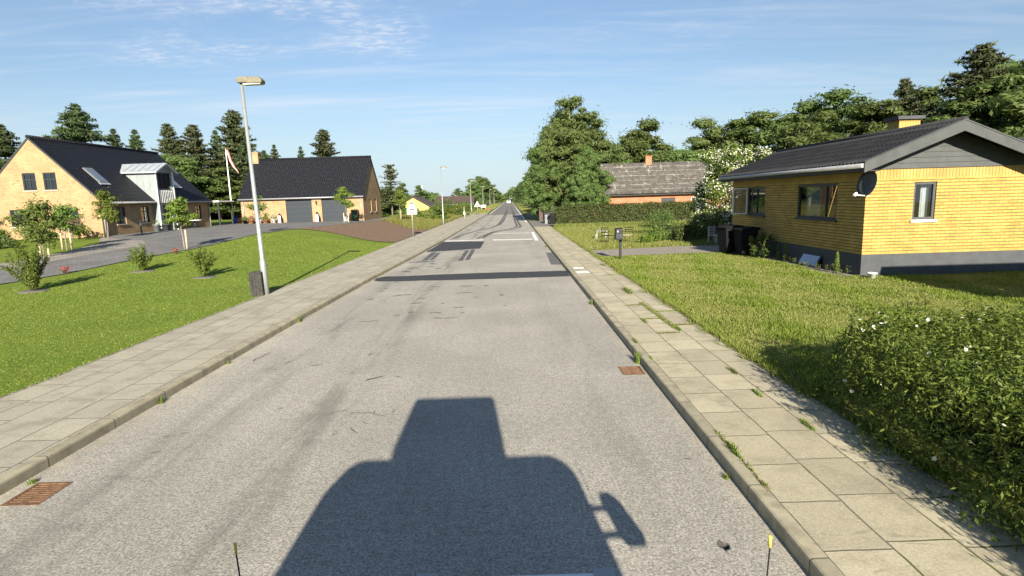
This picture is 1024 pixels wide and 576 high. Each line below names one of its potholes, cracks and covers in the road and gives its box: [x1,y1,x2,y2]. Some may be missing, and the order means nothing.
drain grate [618,366,645,375]
crack [333,409,395,435]
drain grate [0,481,74,506]
